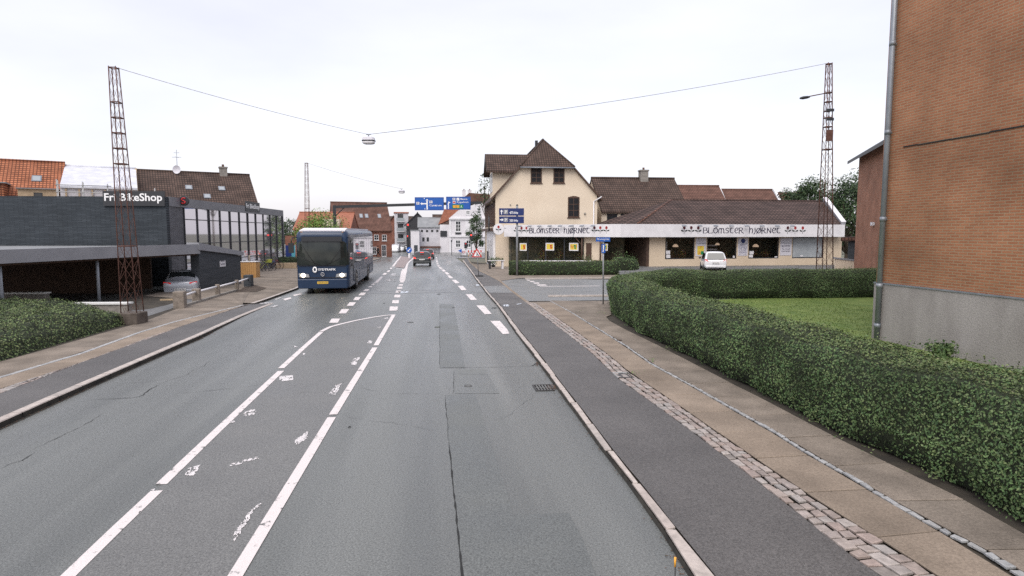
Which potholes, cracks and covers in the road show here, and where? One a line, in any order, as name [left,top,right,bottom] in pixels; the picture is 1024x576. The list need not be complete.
crack [4,366,258,467]
